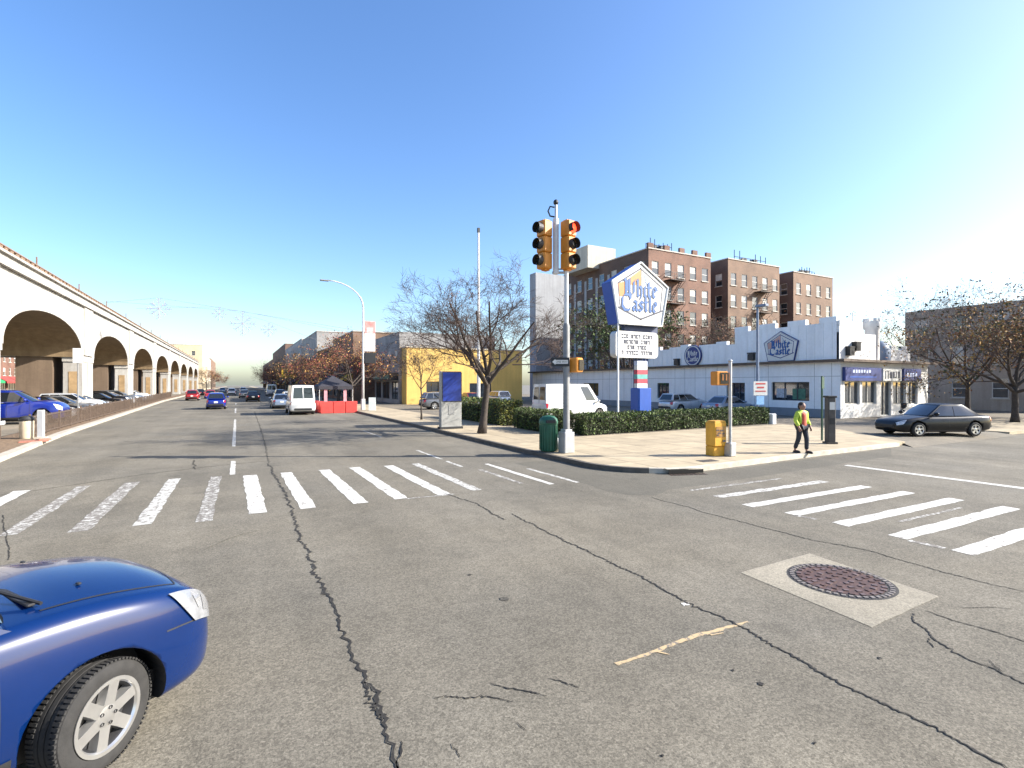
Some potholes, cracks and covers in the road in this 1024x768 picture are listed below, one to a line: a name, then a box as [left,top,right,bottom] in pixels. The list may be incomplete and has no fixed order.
crack [445,493,1024,768]
crack [3,461,403,768]
manhole cover [787,564,899,600]
